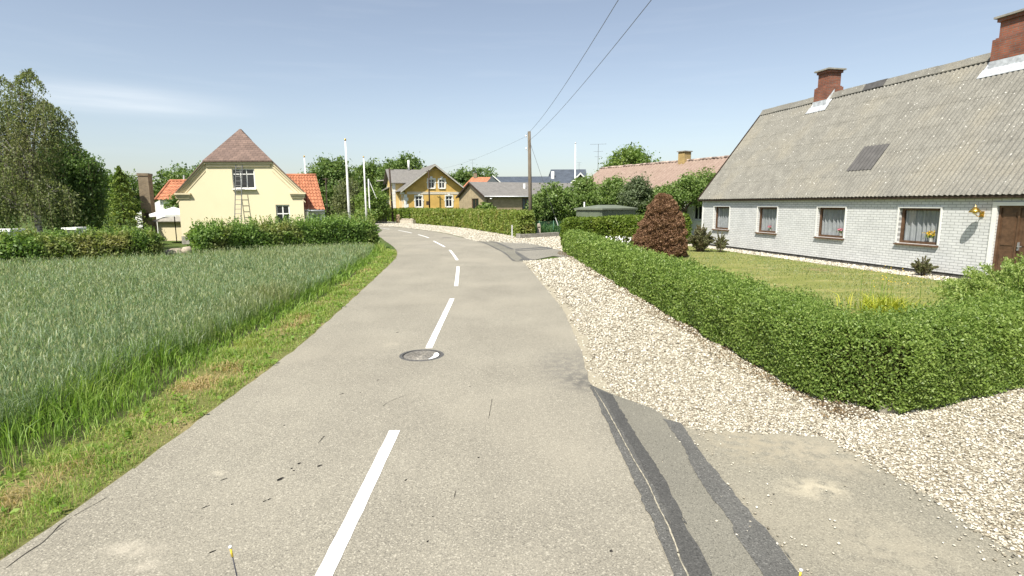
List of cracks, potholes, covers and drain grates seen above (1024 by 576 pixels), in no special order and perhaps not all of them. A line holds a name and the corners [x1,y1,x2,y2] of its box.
manhole cover [399,349,444,361]
crack [6,498,105,568]
